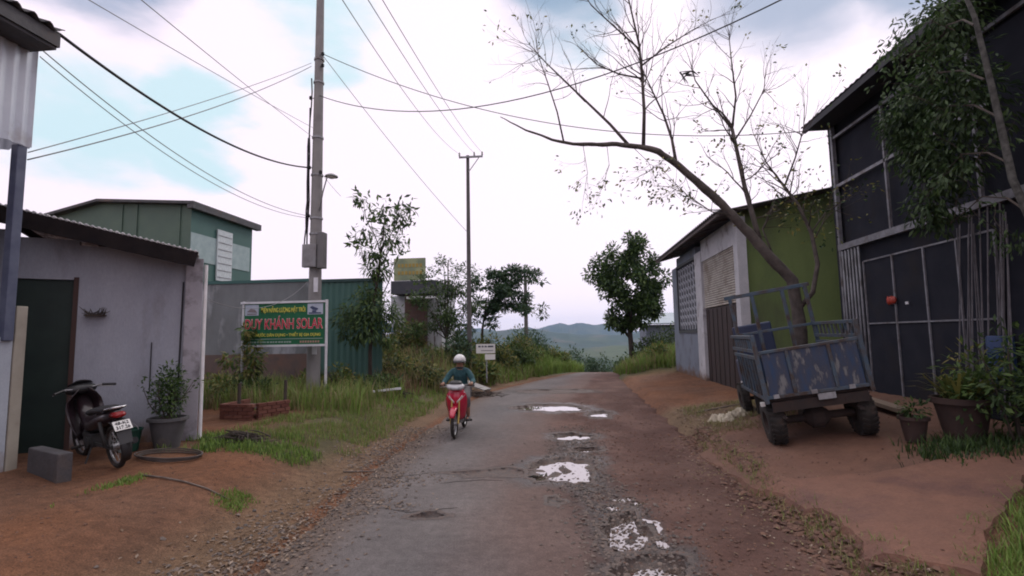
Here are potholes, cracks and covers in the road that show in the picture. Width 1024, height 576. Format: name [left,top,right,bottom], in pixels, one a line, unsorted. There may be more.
pothole [586,410,615,418]
pothole [523,456,601,485]
pothole [547,432,601,441]
pothole [508,403,591,412]
pothole [595,506,660,556]
pothole [600,546,695,576]
pothole [399,509,457,520]
pothole [543,494,570,507]
